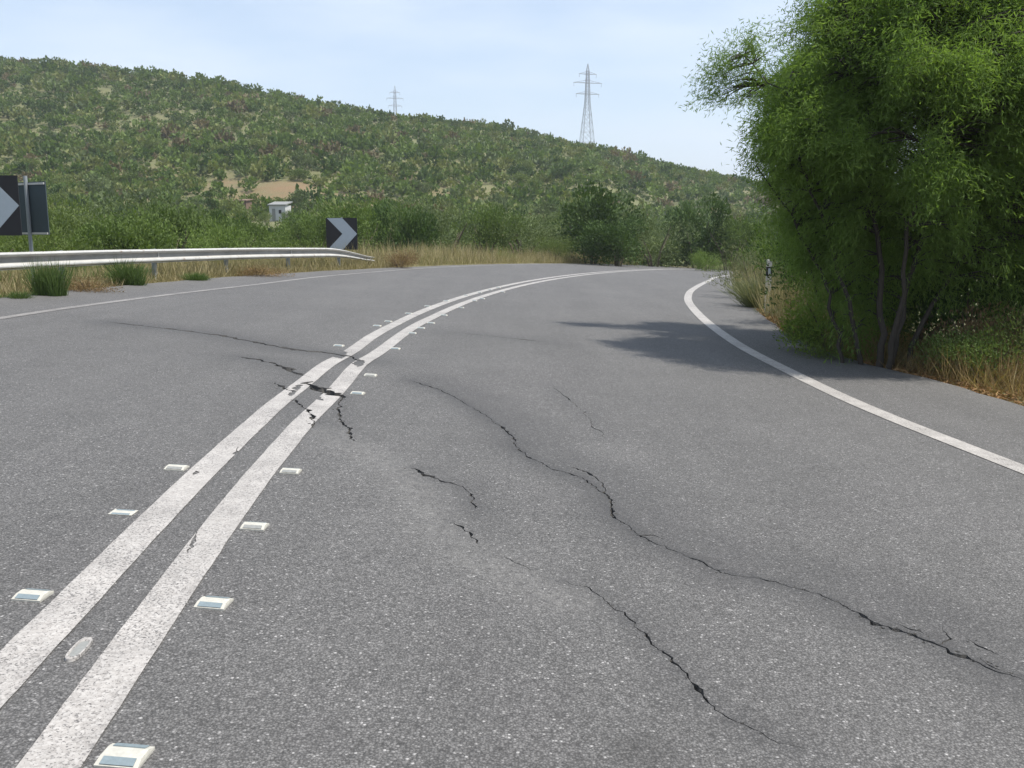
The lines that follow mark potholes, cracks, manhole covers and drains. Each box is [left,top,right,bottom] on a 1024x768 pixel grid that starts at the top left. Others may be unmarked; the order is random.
crack [414,381,1021,679]
crack [566,581,804,749]
crack [112,322,360,441]
